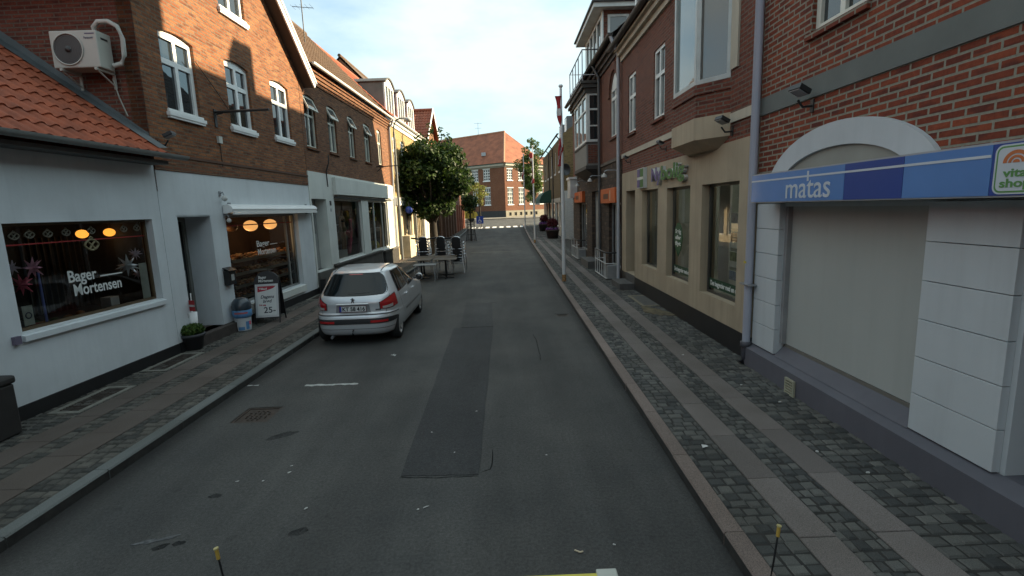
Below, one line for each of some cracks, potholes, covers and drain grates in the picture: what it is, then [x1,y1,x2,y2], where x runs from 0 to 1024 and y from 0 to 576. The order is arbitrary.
pothole [287,527,309,536]
drain grate [231,407,283,423]
pothole [265,431,300,441]
